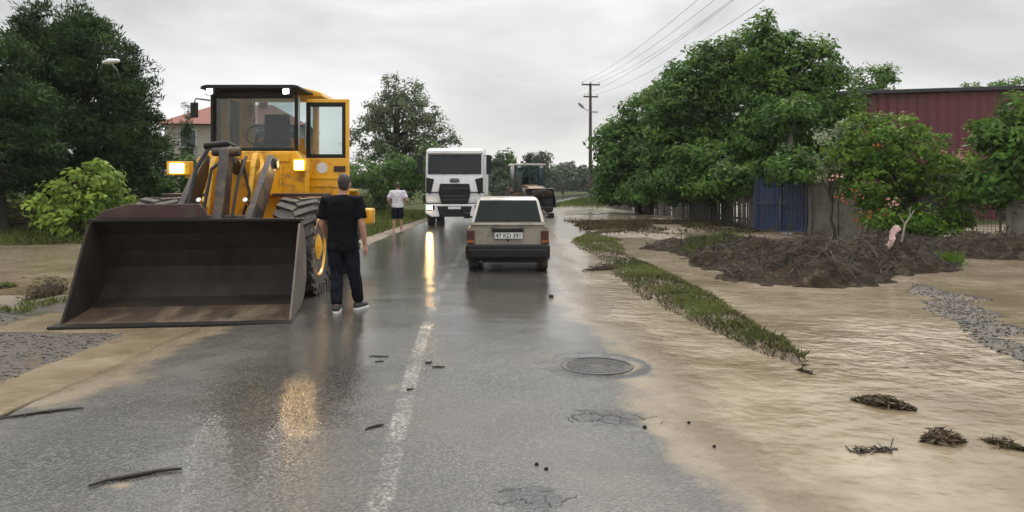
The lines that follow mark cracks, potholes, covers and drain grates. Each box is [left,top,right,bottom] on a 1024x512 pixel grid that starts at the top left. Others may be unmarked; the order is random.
manhole cover [560,357,634,376]
